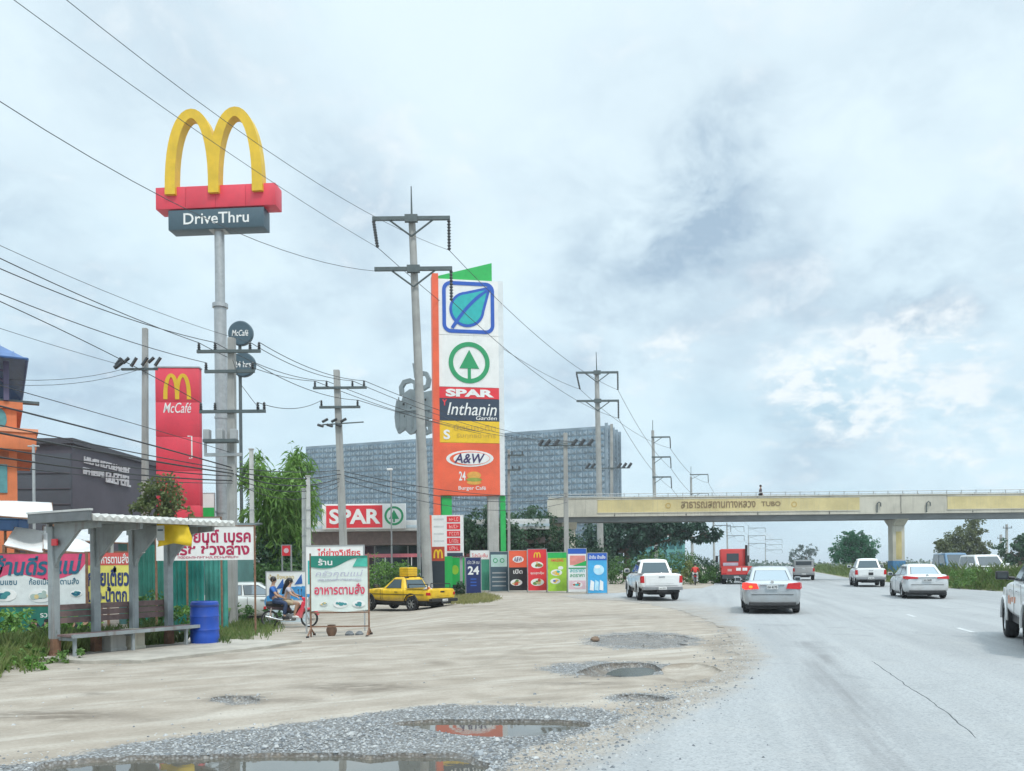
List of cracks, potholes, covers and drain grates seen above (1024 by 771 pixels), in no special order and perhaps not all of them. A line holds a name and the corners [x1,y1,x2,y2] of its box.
pothole [587,633,696,648]
crack [872,661,976,738]
pothole [392,719,591,737]
pothole [211,696,260,704]
pothole [33,752,491,771]
pothole [616,693,669,702]
pothole [577,663,662,677]
